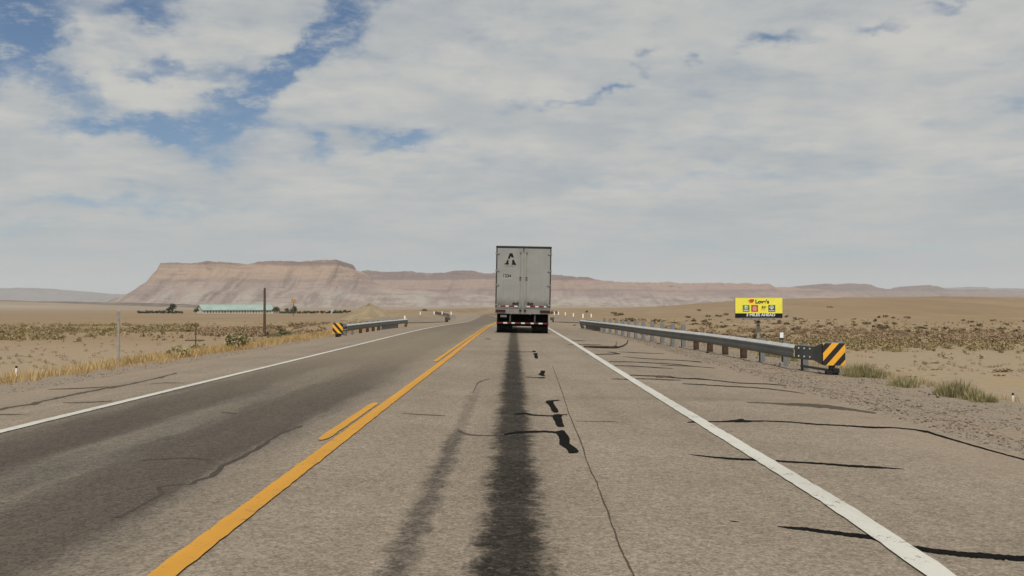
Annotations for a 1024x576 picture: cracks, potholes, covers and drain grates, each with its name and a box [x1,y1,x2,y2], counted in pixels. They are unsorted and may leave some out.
crack [116,412,302,517]
